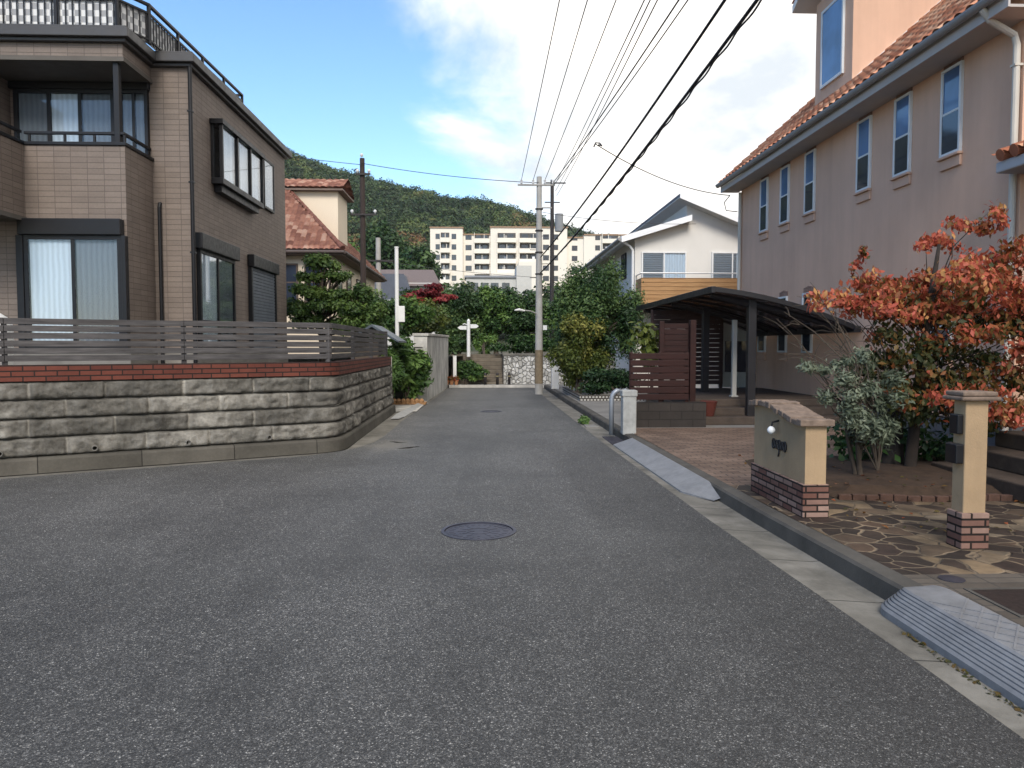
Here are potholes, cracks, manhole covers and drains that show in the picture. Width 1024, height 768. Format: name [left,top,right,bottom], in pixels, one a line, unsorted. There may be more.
utility cover [963,587,1024,618]
utility cover [938,575,966,583]
manhole cover [441,521,517,540]
